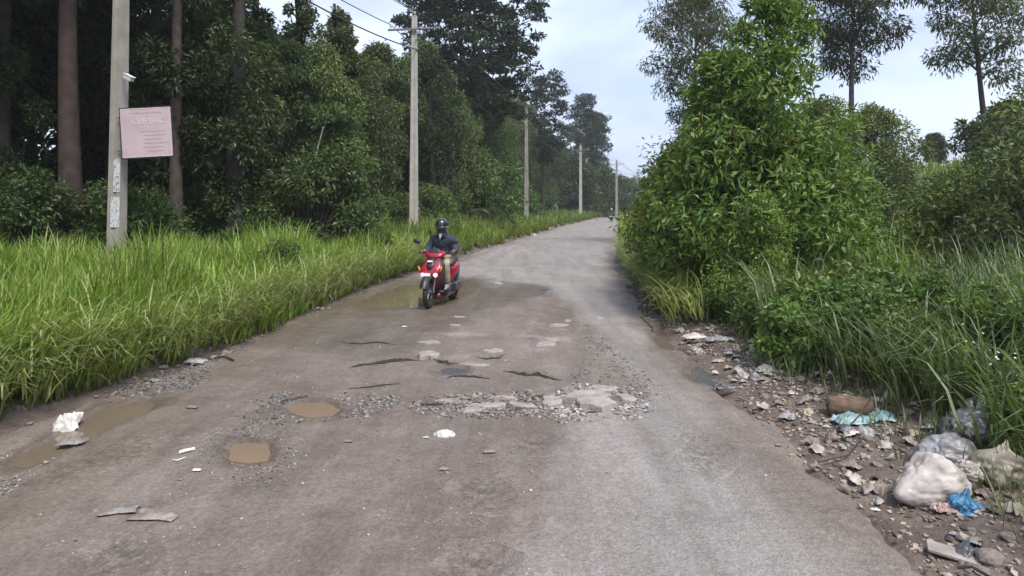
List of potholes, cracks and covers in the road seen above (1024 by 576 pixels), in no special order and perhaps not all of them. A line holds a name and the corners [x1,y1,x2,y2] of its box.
pothole [430,365,472,376]
crack [342,341,596,415]
pothole [311,278,485,313]
pothole [280,398,347,420]
pothole [221,438,280,467]
